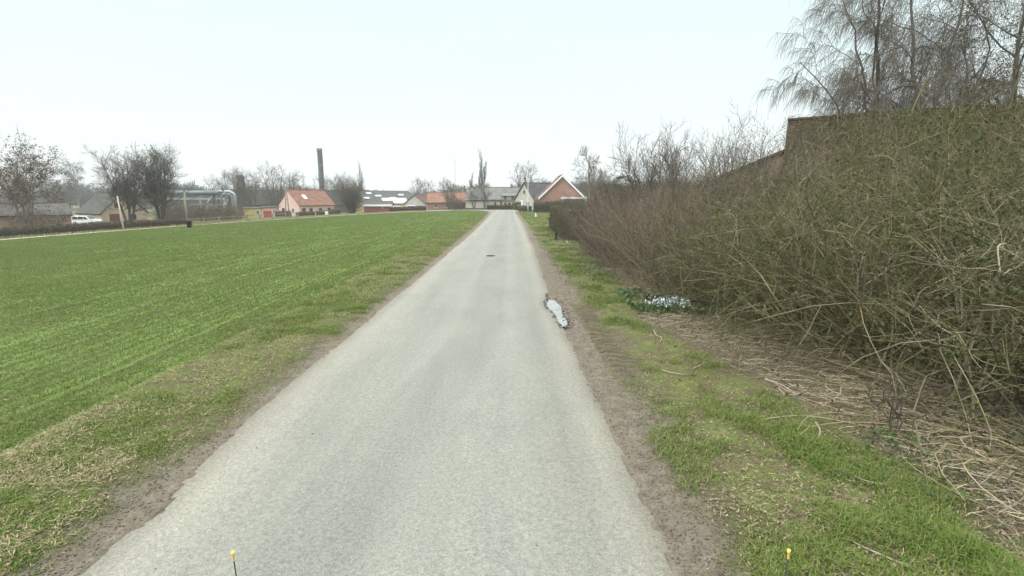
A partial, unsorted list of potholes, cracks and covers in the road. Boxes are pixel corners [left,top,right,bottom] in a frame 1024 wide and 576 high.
pothole [543,291,578,334]
